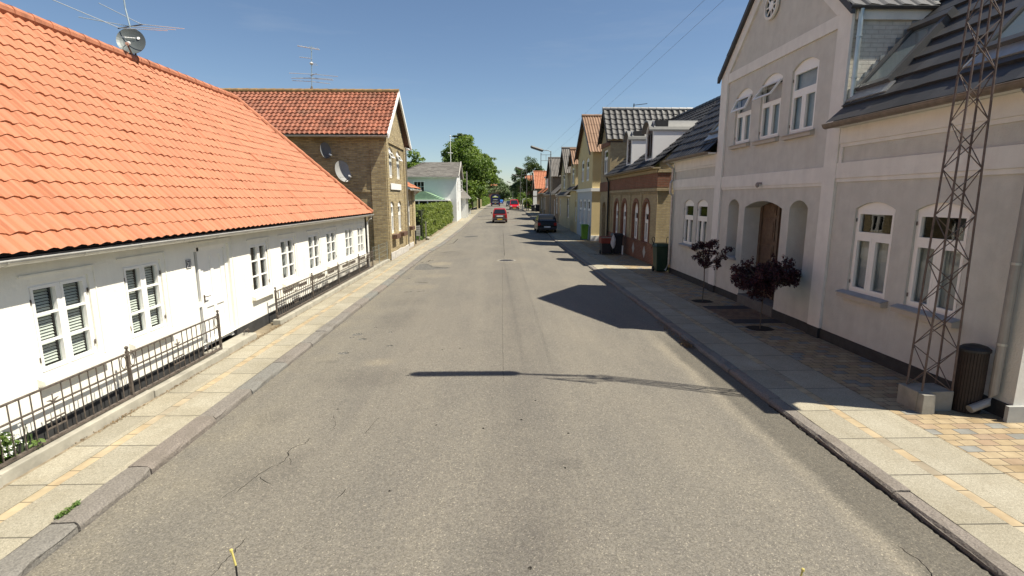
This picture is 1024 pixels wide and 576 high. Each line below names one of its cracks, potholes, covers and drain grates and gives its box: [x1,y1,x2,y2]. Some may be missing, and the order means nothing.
crack [226,439,309,495]
